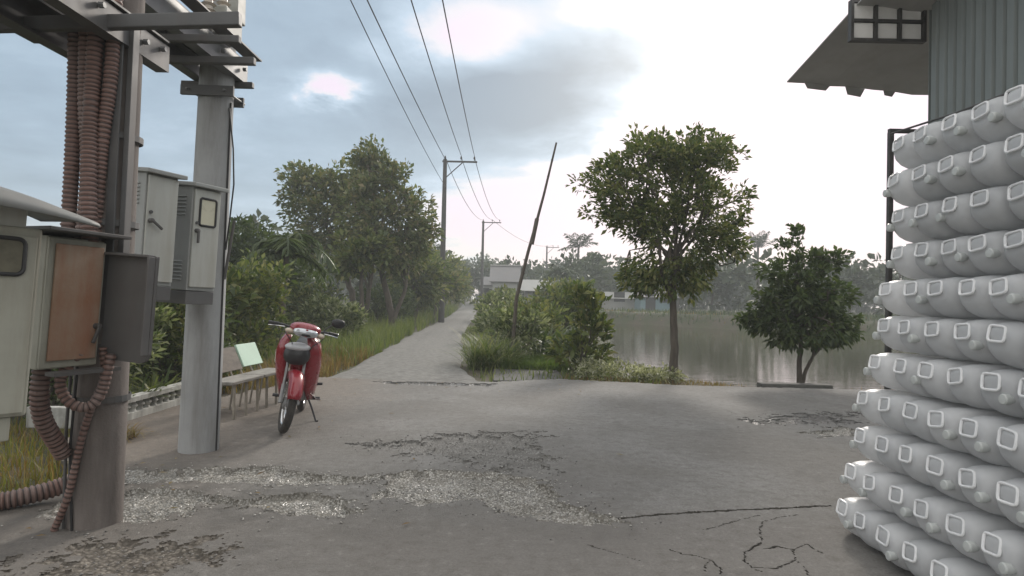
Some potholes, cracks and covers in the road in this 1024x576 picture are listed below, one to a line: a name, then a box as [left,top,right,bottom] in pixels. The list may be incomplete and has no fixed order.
pothole [370,469,631,528]
pothole [0,529,245,576]
pothole [736,411,867,428]
pothole [33,488,370,524]
pothole [798,427,855,438]
pothole [345,429,565,476]
pothole [125,465,386,488]
crack [617,505,831,576]
